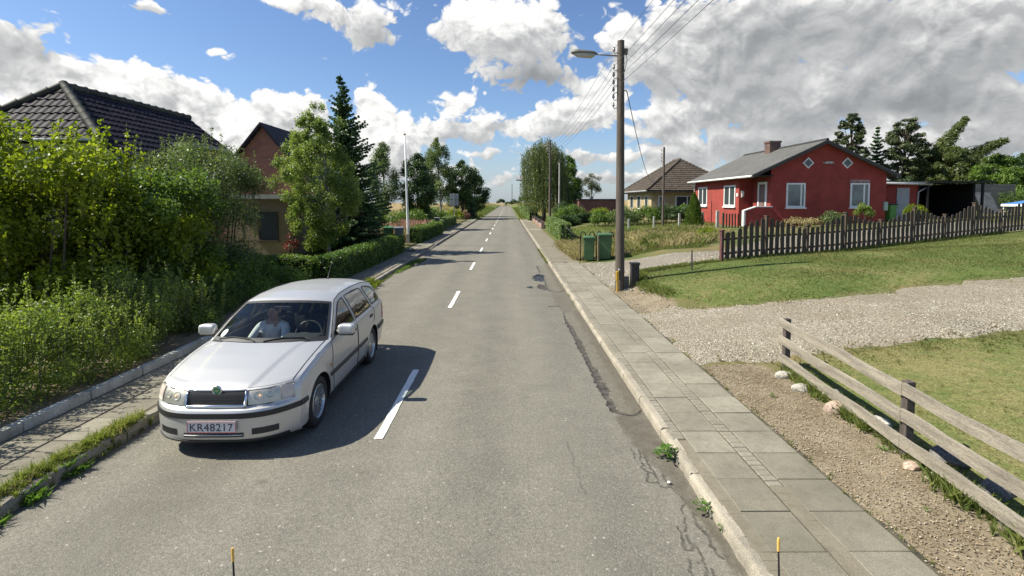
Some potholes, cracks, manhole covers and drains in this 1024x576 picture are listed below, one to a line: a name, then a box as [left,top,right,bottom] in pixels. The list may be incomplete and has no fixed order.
crack [567,443,587,494]
crack [630,448,725,576]
crack [536,266,642,416]
